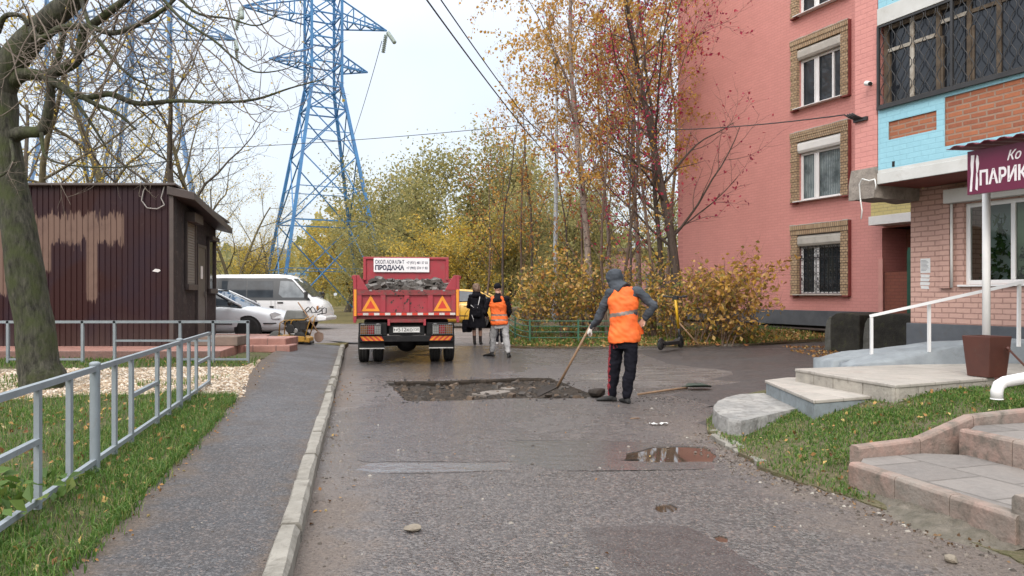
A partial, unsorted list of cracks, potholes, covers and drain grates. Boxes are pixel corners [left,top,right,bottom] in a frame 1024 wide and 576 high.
pothole [385,378,591,401]
